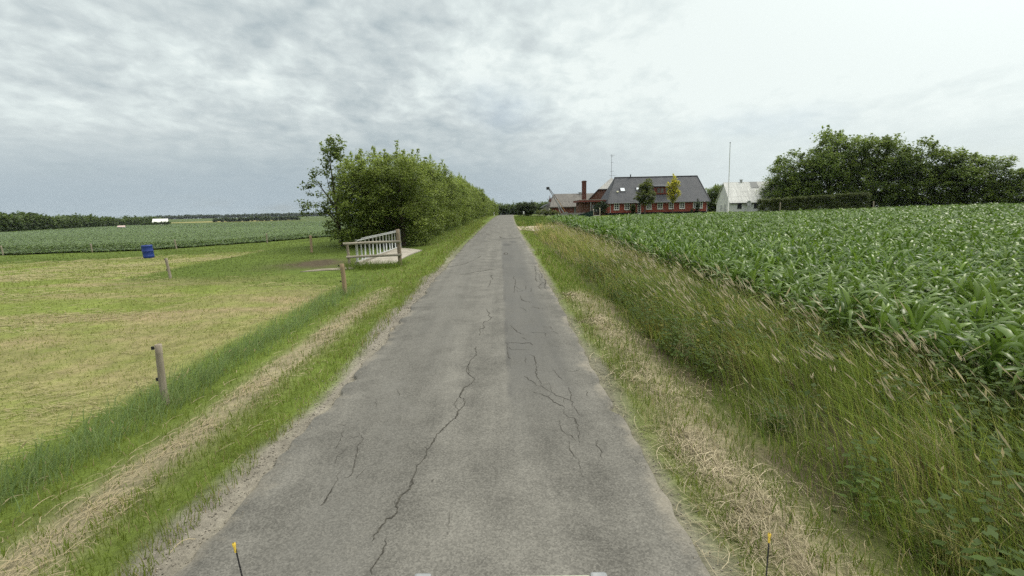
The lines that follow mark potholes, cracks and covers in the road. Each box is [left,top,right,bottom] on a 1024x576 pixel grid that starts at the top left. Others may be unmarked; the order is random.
crack [457,238,546,309]
crack [525,354,602,476]
crack [321,348,477,575]
